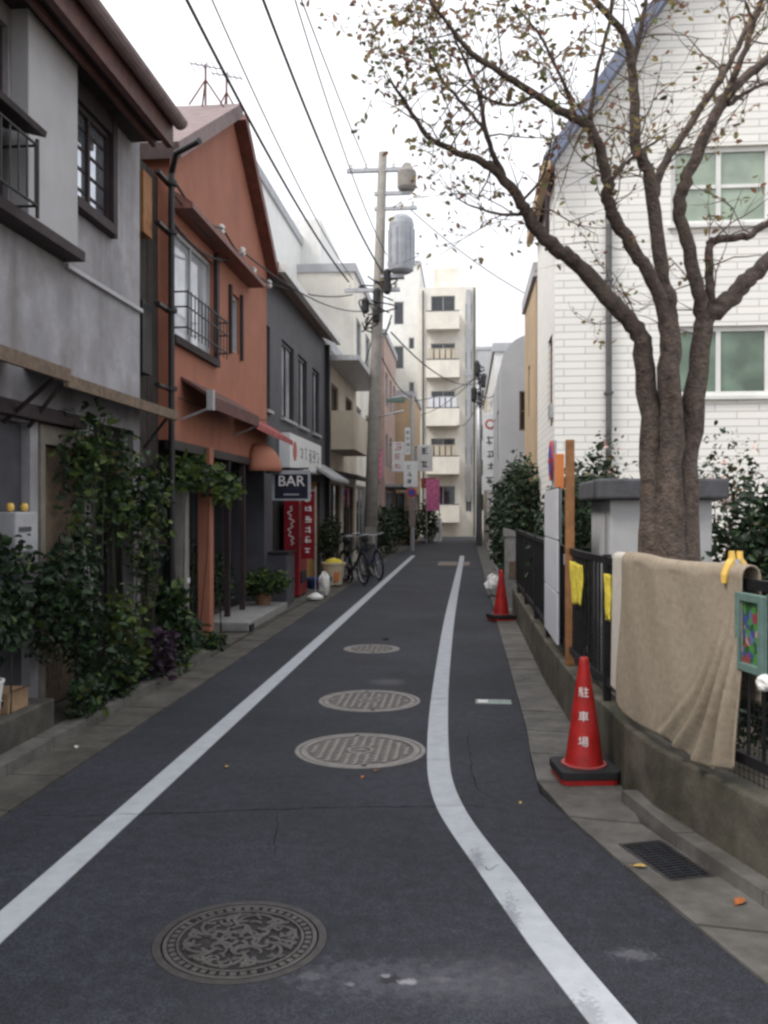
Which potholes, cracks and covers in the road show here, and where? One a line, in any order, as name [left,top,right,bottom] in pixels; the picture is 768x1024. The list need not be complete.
manhole cover [344,644,400,653]
manhole cover [319,690,420,712]
manhole cover [152,901,327,985]
manhole cover [295,733,426,769]
drain grate [618,839,717,882]
